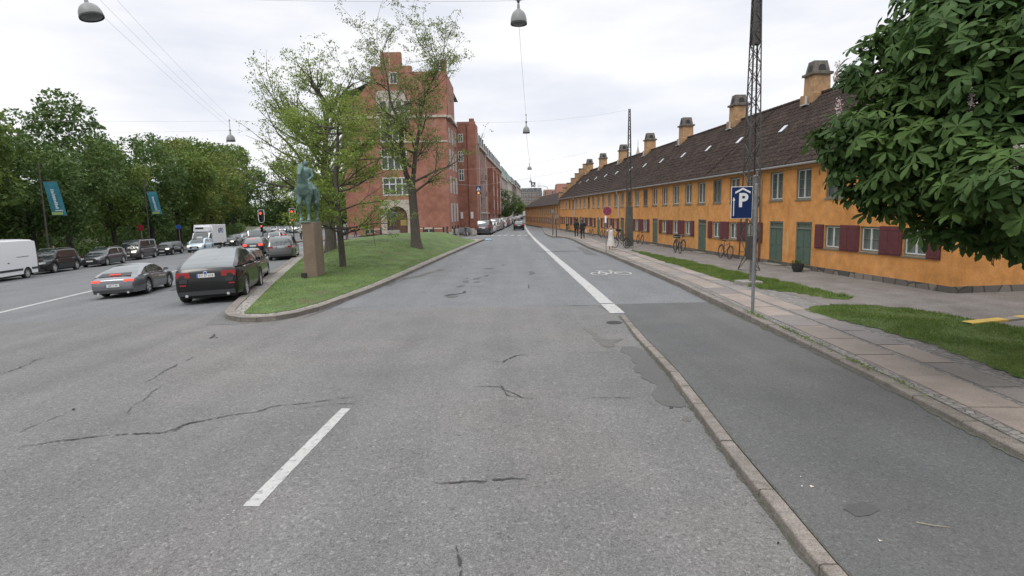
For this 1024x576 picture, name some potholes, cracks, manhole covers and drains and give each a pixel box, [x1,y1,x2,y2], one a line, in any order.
crack [2,397,356,448]
